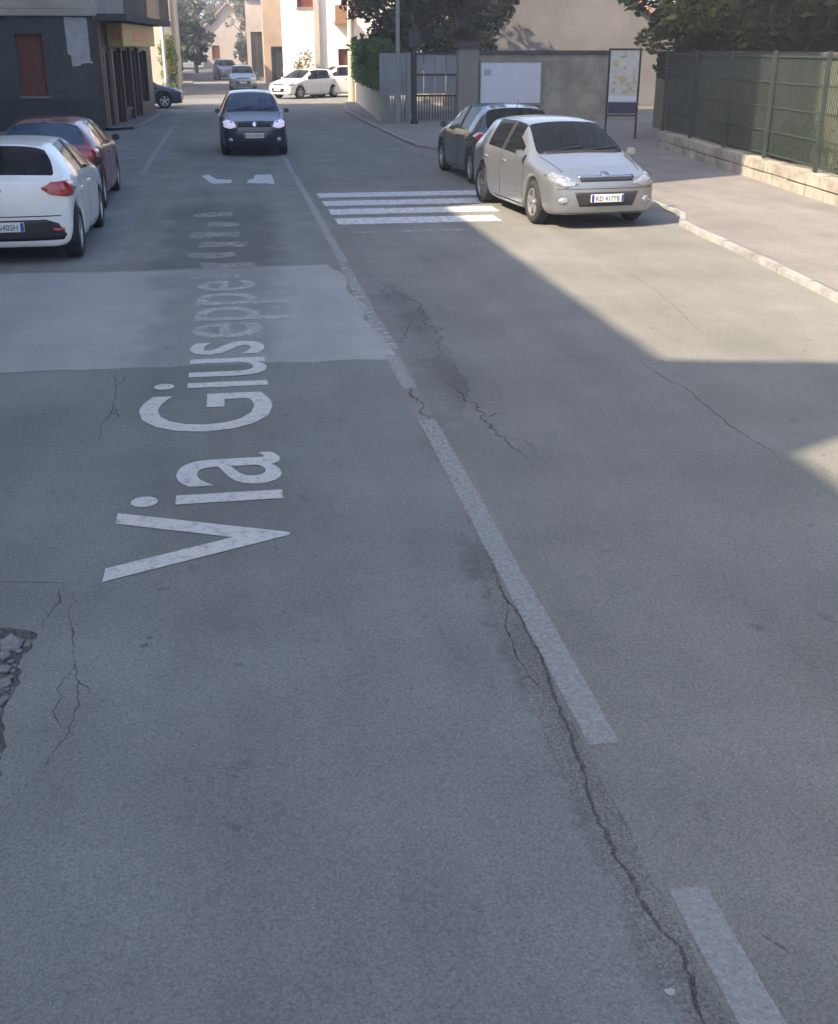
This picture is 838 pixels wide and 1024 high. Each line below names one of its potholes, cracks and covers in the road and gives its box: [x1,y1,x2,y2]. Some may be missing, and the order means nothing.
crack [761,934,789,953]
crack [98,375,126,443]
crack [4,587,91,811]
crack [491,554,706,1024]
pothole [0,628,38,776]
crack [368,277,537,470]
